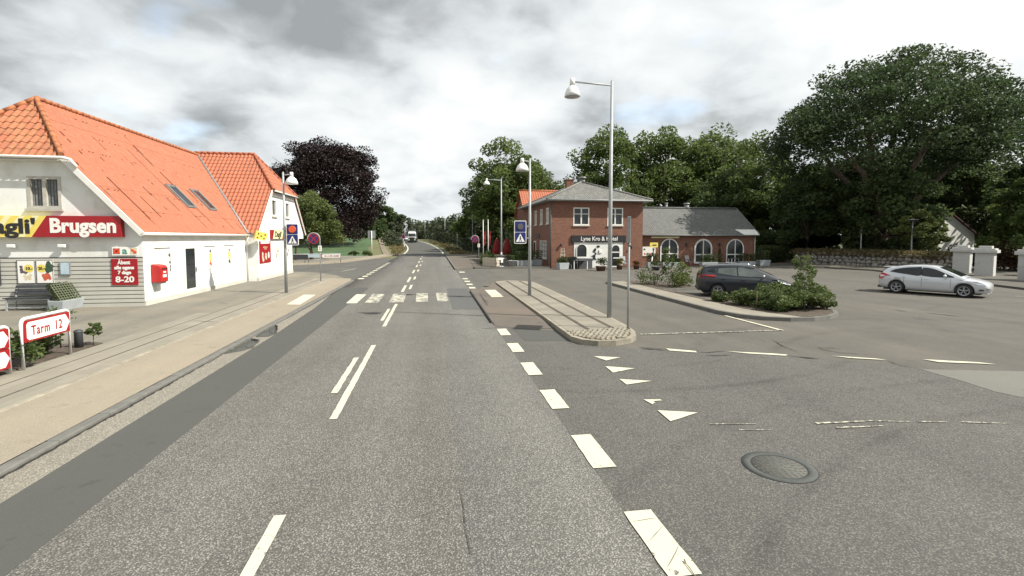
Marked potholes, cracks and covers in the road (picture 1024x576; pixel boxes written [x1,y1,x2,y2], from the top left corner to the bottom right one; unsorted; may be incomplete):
manhole cover [741,451,819,484]
